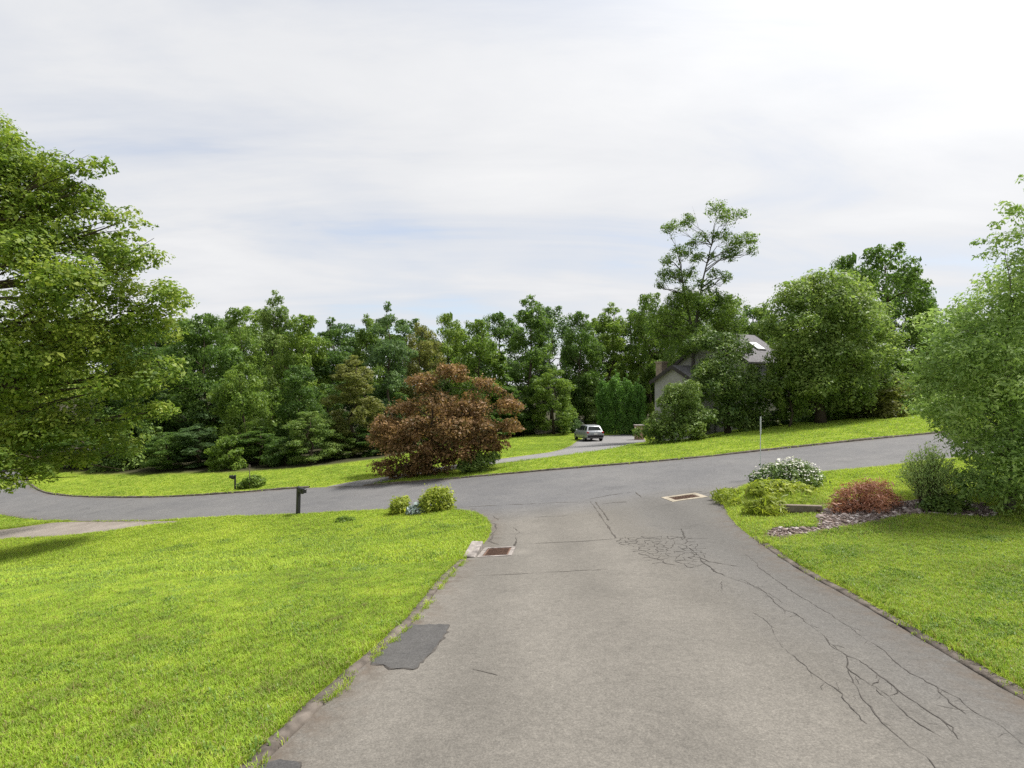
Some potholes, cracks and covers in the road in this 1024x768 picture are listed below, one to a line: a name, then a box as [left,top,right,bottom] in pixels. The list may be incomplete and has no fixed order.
drain grate [661,493,708,502]
drain grate [463,541,516,559]
crack [615,528,1023,768]
